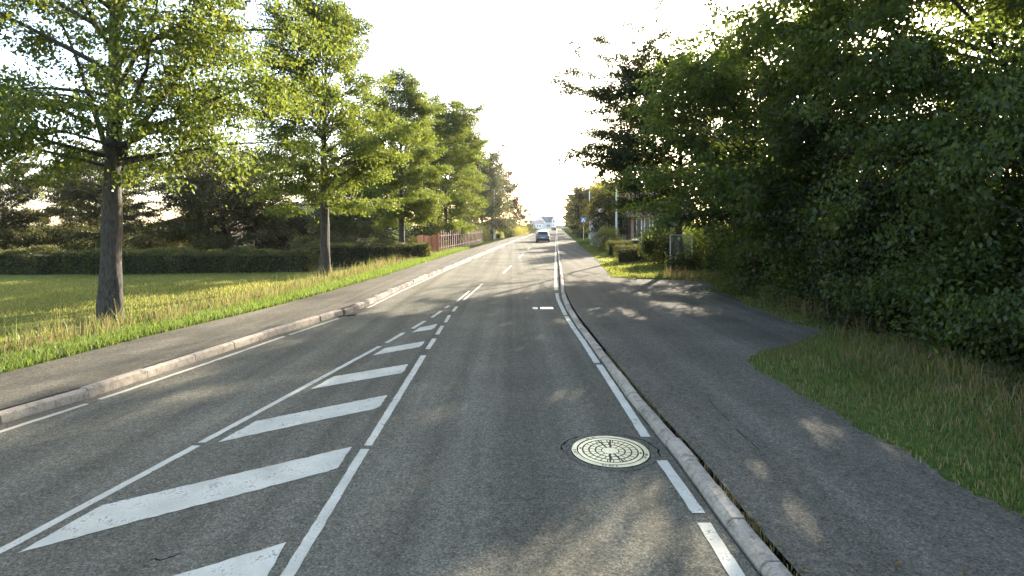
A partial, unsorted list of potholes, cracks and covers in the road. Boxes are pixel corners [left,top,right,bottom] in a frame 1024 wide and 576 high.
manhole cover [572,436,650,468]
